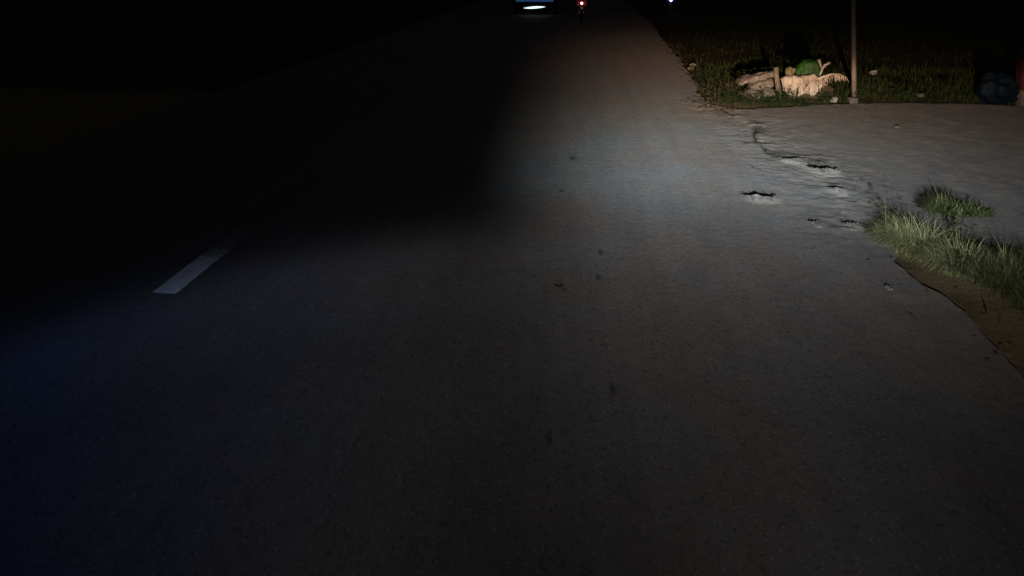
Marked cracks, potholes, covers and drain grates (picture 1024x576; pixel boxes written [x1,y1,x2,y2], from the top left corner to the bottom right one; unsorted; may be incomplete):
pothole [805,161,841,174]
pothole [838,218,862,227]
pothole [739,189,779,202]
